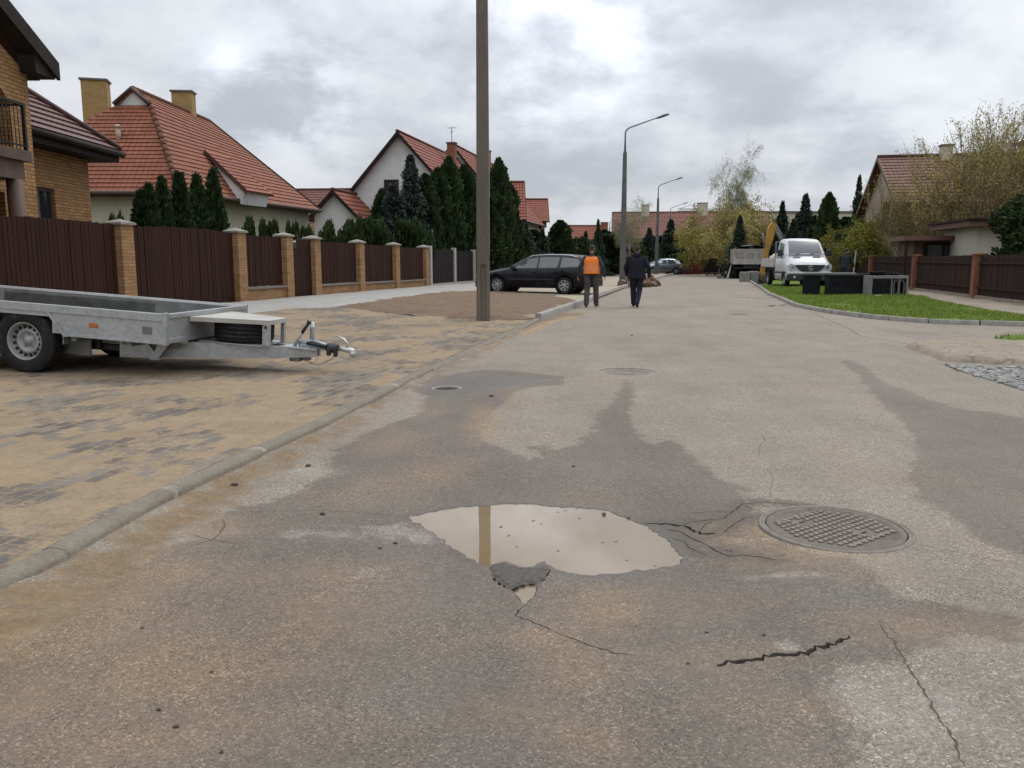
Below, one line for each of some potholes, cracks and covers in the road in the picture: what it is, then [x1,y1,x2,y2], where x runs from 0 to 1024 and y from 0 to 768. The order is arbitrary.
crack [878,621,965,767]
crack [717,635,850,667]
crack [190,510,403,552]
crack [491,572,629,655]
crack [646,502,801,560]
pothole [403,503,686,575]
pothole [489,563,550,605]
manhole cover [758,505,916,554]
